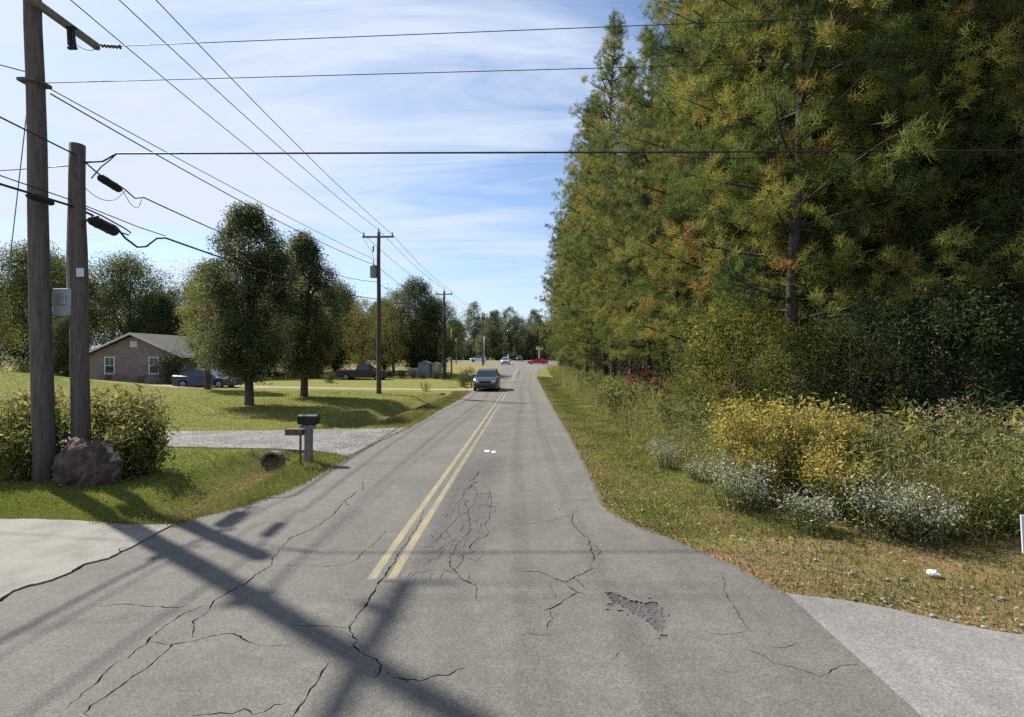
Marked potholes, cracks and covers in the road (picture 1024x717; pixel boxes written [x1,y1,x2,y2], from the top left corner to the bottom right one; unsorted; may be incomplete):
crack [750,641,857,676]
crack [513,507,602,637]
pothole [605,592,670,639]
crack [67,472,496,716]
crack [703,573,747,635]
